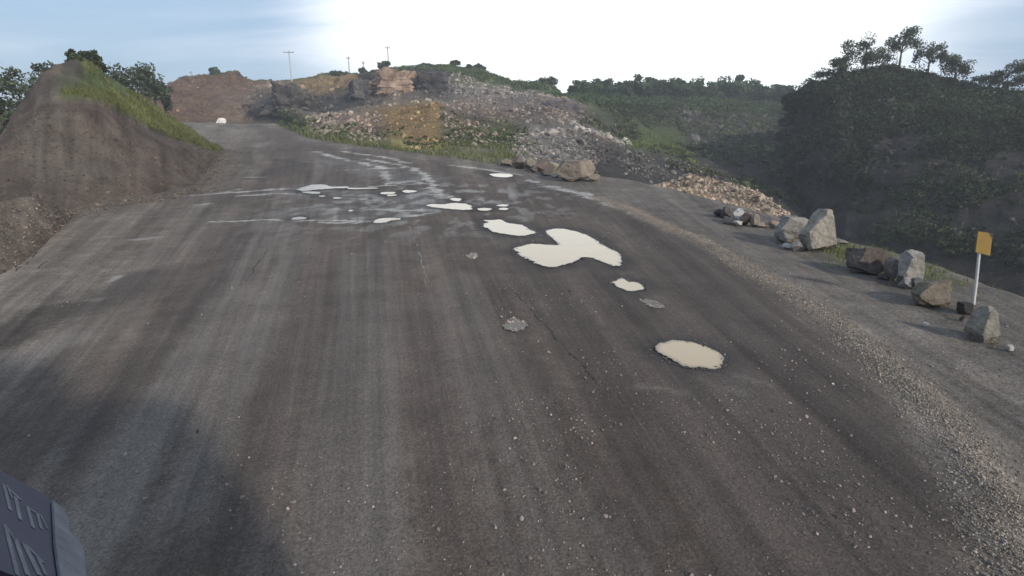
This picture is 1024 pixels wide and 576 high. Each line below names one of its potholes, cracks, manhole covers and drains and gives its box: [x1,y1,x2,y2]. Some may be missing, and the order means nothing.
pothole [654,339,730,372]
pothole [477,217,536,237]
pothole [639,298,666,309]
pothole [611,278,647,292]
pothole [426,203,473,211]
crack [512,289,598,384]
pothole [502,317,528,332]
pothole [512,227,626,269]
